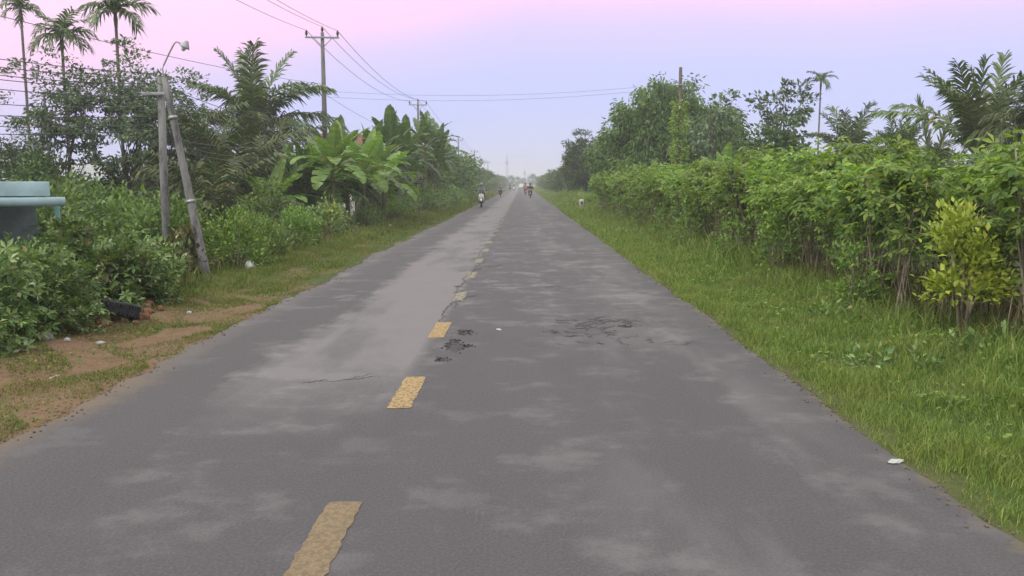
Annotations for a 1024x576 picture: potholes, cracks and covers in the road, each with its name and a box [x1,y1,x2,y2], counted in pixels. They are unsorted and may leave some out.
pothole [441,339,465,354]
crack [439,278,477,321]
crack [543,316,697,345]
